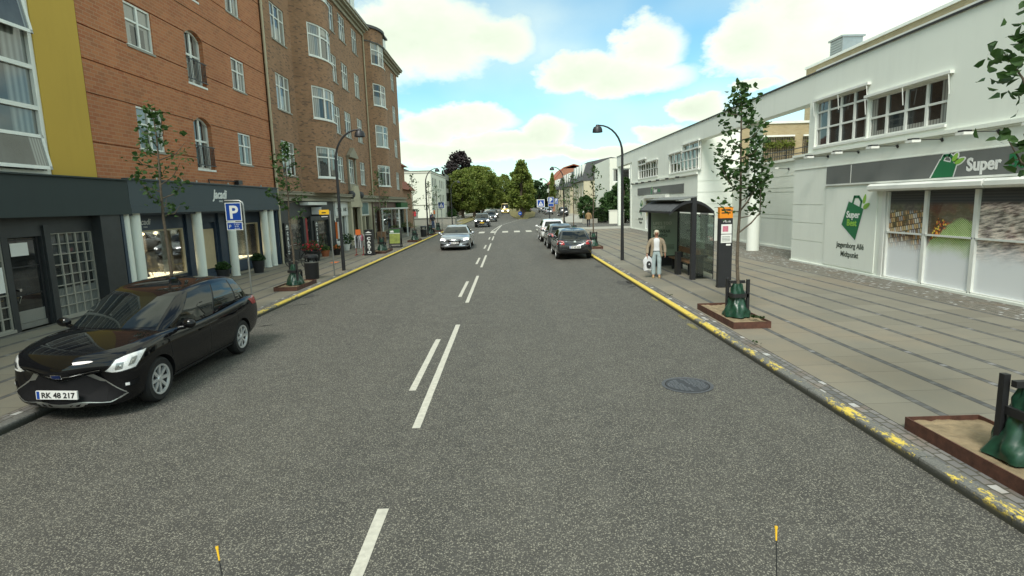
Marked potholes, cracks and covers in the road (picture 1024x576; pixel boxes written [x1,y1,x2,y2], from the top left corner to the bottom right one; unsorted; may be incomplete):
manhole cover [661,377,714,393]
